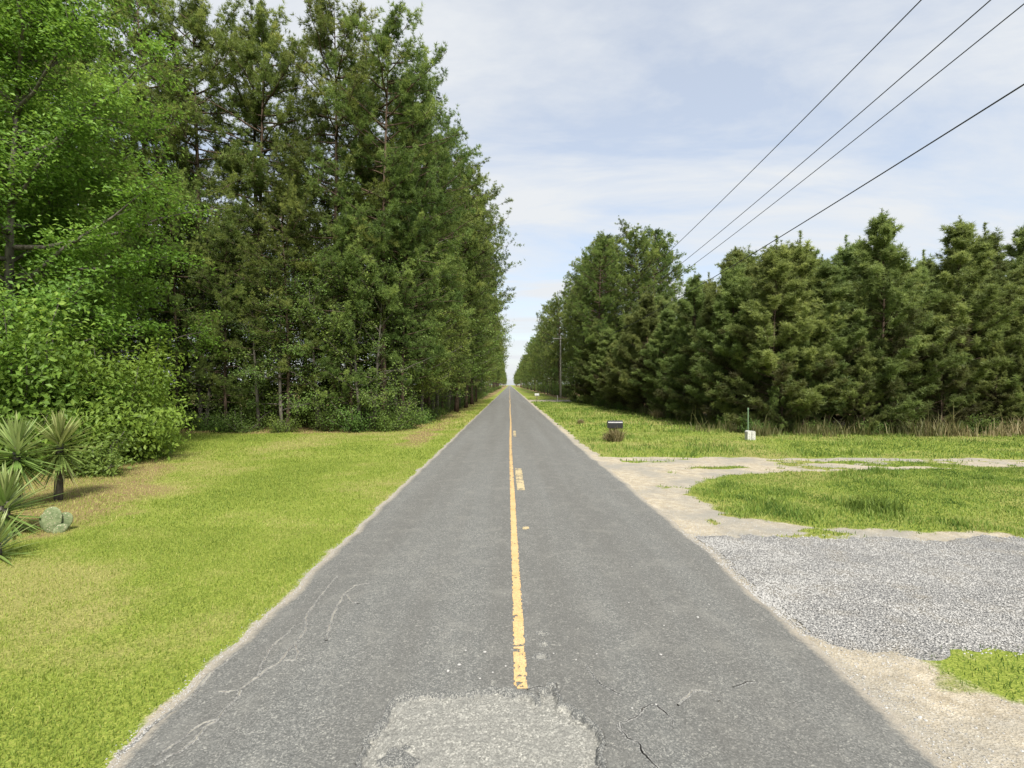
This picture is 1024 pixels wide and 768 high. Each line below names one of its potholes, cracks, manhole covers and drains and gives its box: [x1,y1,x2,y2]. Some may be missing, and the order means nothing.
crack [117,576,369,767]
crack [585,665,756,768]
